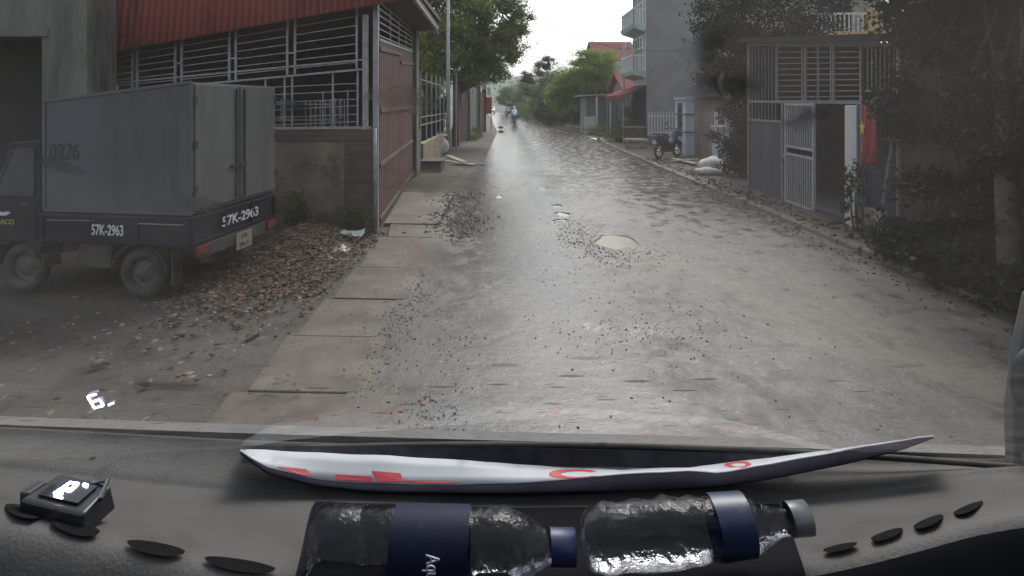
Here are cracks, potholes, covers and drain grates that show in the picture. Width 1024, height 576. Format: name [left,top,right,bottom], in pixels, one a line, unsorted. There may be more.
pothole [591,234,642,250]
